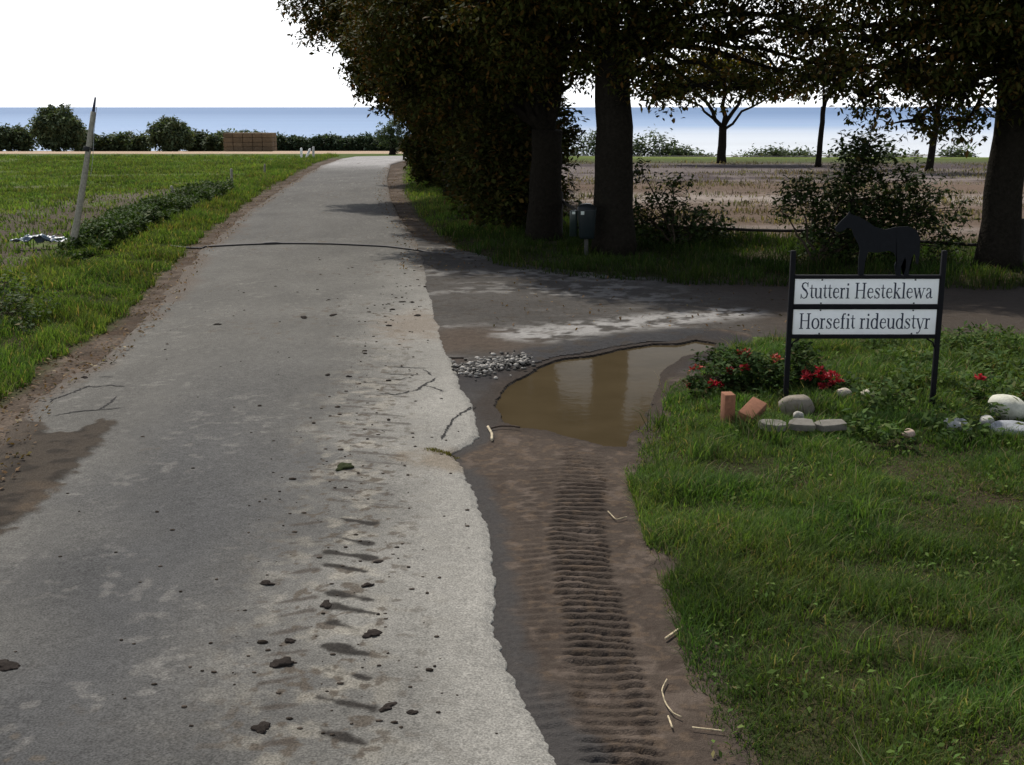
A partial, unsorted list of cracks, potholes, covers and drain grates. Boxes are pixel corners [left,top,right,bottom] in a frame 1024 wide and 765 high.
pothole [493,340,716,446]
crack [382,367,442,395]
crack [440,405,476,439]
crack [50,376,121,415]
